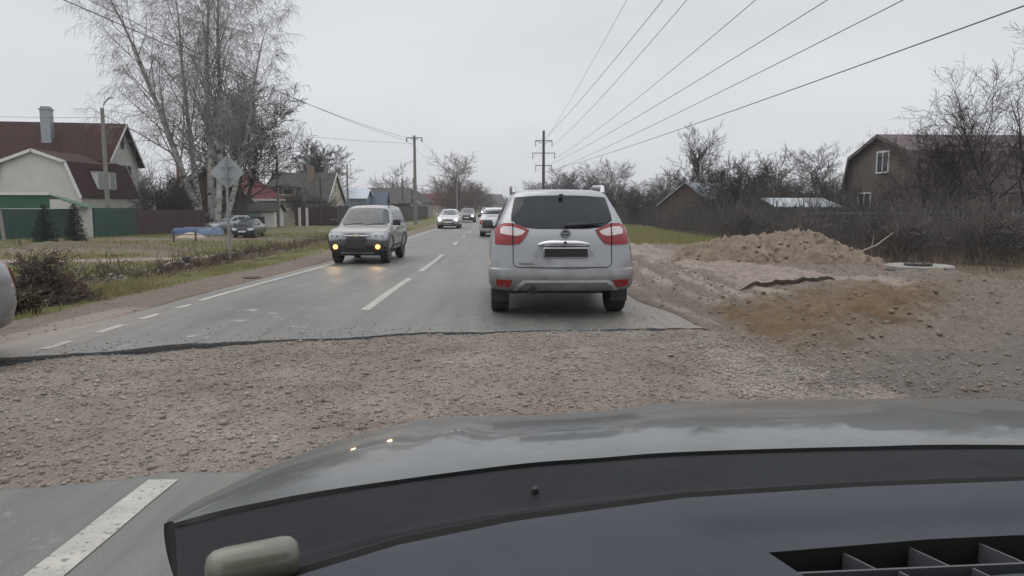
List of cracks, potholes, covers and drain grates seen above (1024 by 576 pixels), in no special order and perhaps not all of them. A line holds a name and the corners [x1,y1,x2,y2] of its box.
manhole cover [884,262,956,271]
